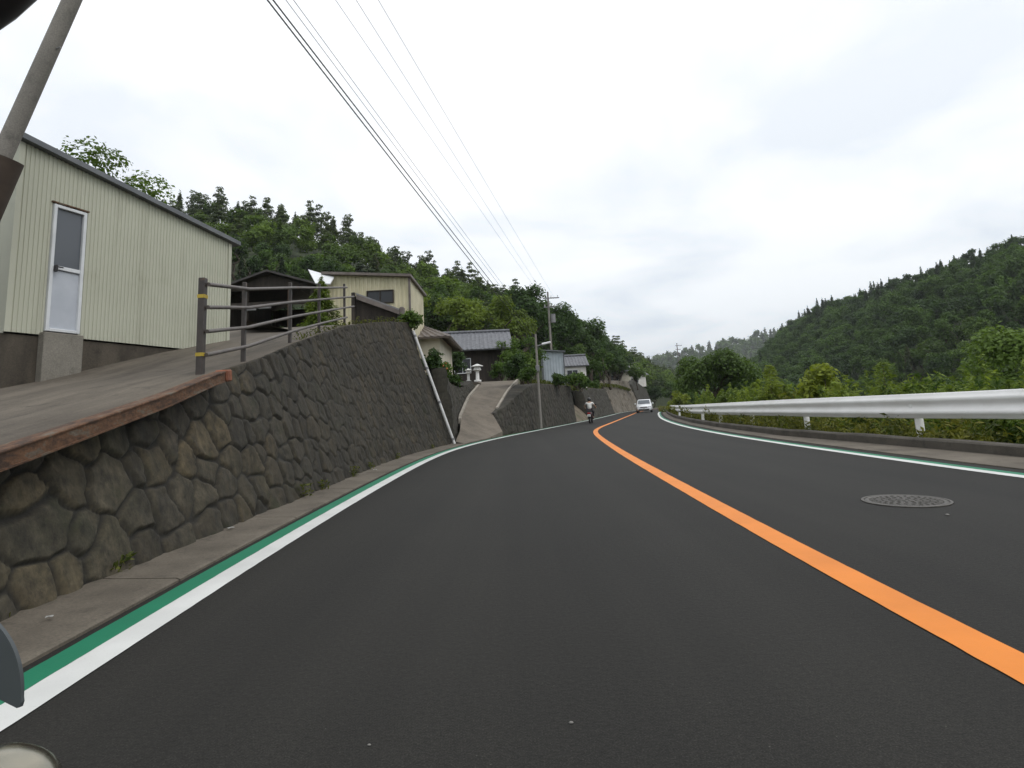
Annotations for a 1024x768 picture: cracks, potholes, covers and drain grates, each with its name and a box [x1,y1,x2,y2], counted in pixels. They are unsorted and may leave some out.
manhole cover [861,494,954,508]
